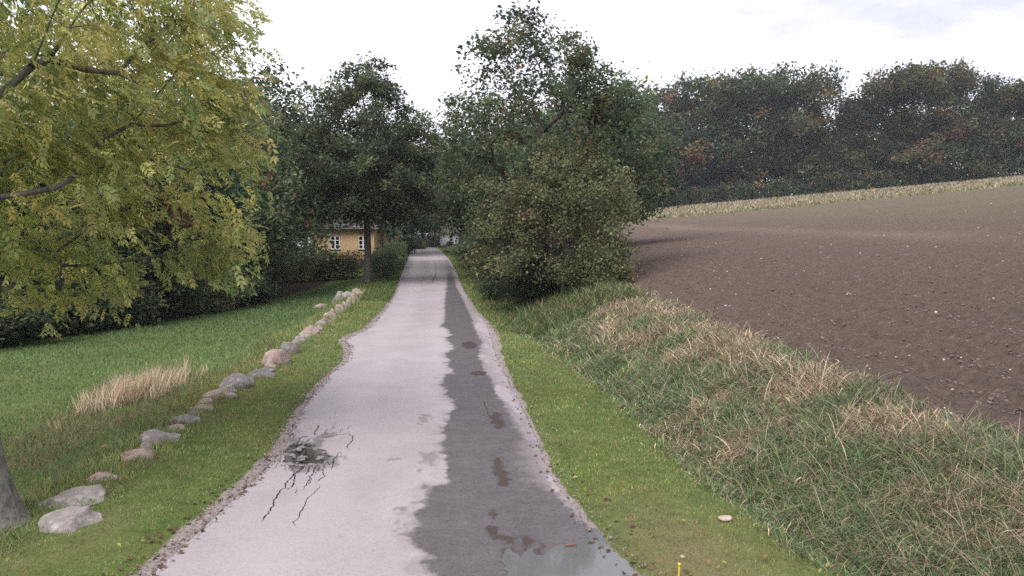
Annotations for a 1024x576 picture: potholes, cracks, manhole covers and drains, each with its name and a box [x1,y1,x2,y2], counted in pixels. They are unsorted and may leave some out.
crack [261,413,353,525]
pothole [283,442,331,468]
